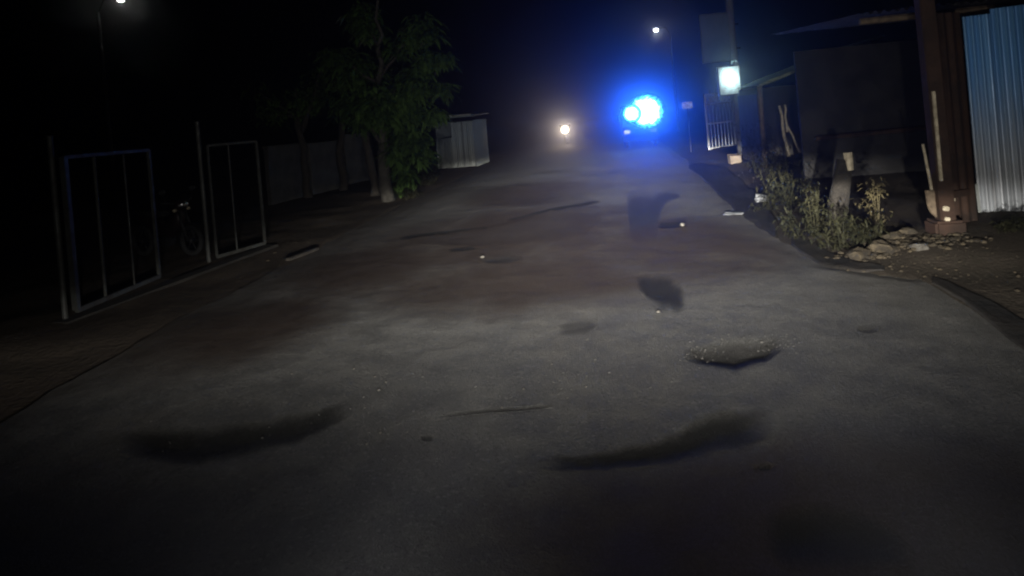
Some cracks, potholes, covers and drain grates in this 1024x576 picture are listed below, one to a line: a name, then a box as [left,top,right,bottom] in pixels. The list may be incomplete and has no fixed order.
crack [442,405,556,418]
pothole [635,273,687,316]
pothole [558,318,599,337]
pothole [112,398,354,468]
pothole [654,221,687,230]
pothole [855,325,882,334]
crack [507,201,600,221]
pothole [538,408,777,473]
pothole [680,336,785,372]
